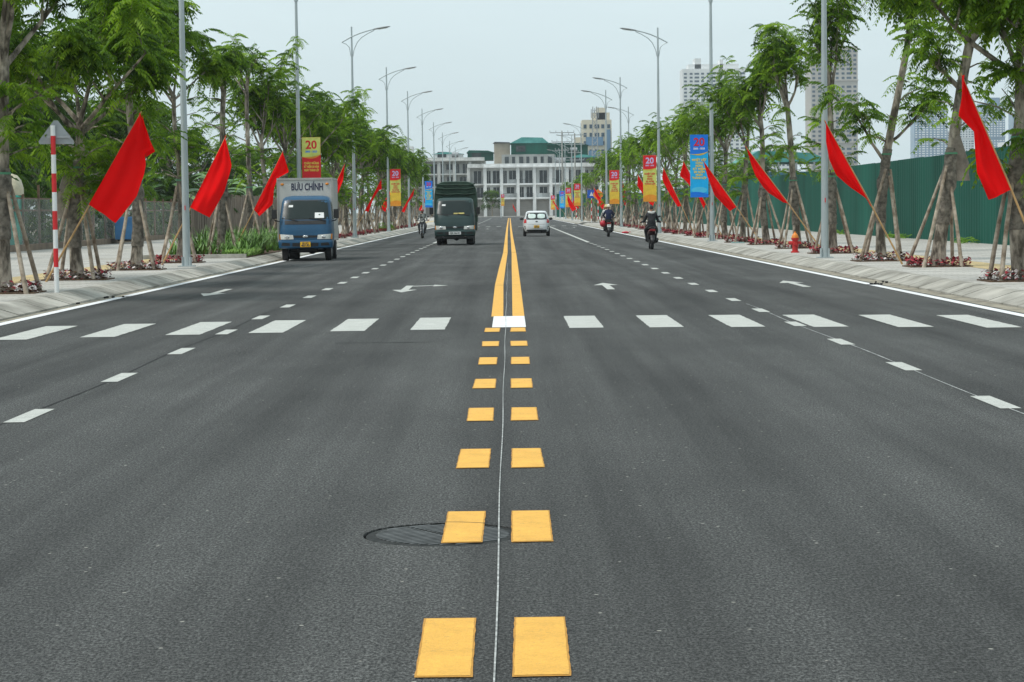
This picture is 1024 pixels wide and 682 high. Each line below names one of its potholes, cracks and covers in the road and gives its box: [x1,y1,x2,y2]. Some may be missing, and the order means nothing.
manhole cover [366,522,512,546]
